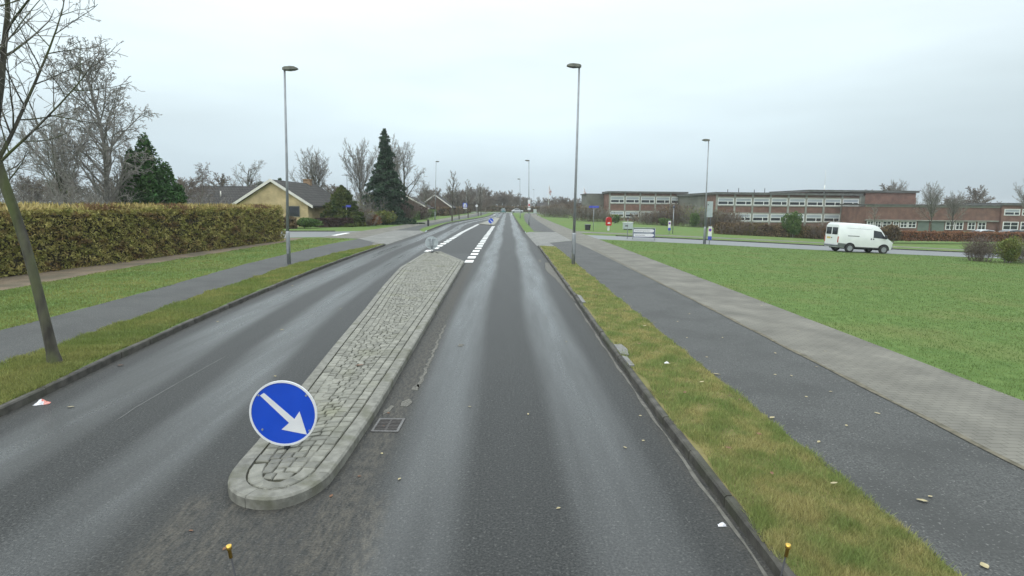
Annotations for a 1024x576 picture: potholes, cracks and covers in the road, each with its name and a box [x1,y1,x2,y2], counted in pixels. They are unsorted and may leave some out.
drain grate [371,418,405,433]
crack [111,358,222,424]
crack [418,325,446,387]
